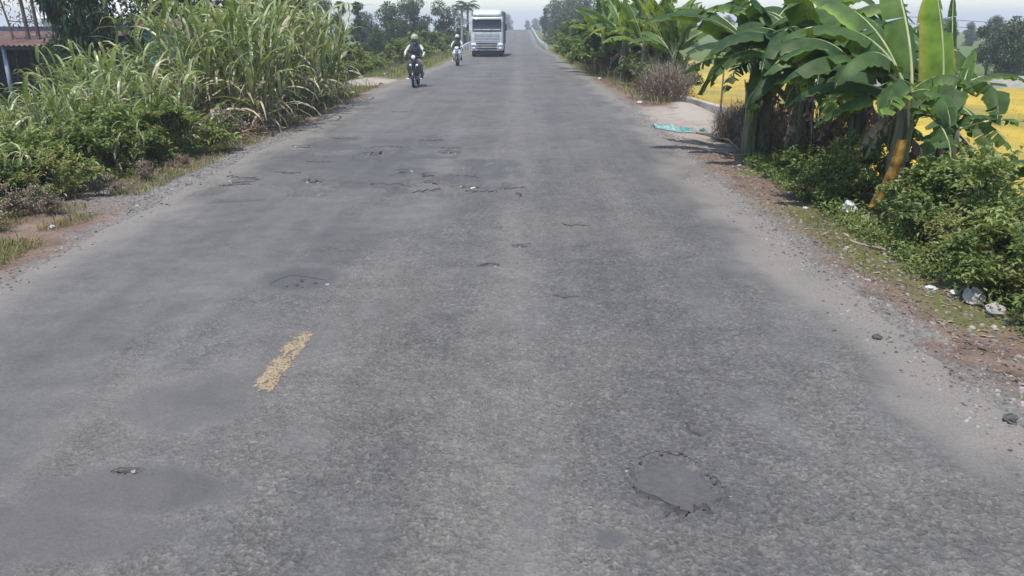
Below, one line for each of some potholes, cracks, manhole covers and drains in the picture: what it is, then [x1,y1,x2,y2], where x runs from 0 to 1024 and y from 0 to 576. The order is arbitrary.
pothole [271,276,329,288]
pothole [625,451,732,519]
